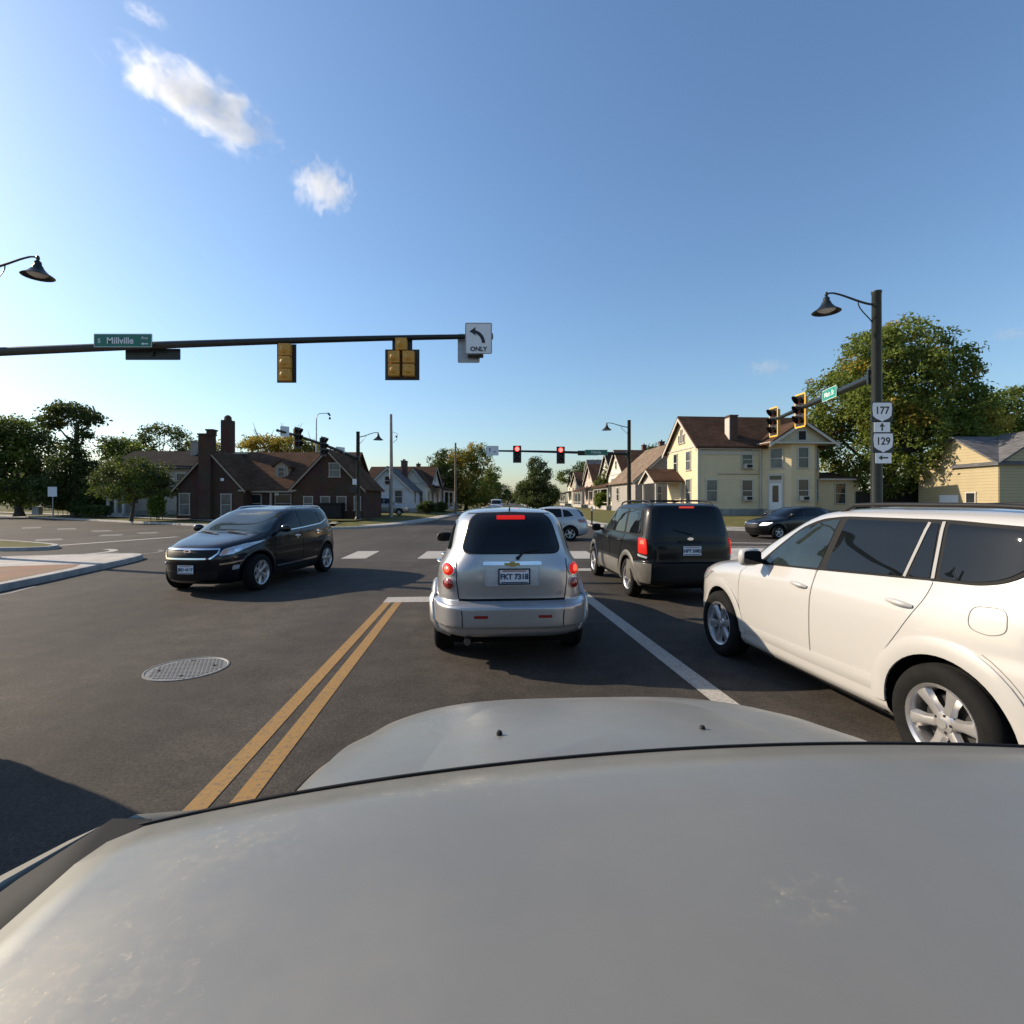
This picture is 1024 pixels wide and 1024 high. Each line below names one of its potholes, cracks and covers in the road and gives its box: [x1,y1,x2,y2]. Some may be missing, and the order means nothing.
manhole cover [142,657,230,682]
